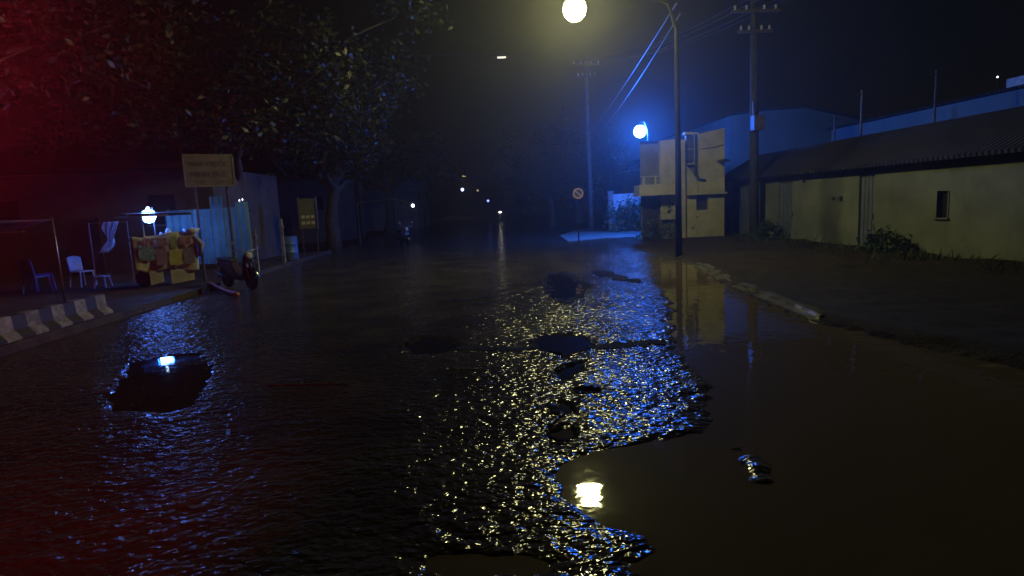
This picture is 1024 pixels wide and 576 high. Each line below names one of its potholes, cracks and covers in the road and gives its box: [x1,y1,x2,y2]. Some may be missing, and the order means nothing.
pothole [571,385,601,393]
pothole [399,335,461,354]
pothole [546,422,580,441]
pothole [528,331,596,359]
pothole [539,271,591,303]
pothole [549,358,590,381]
